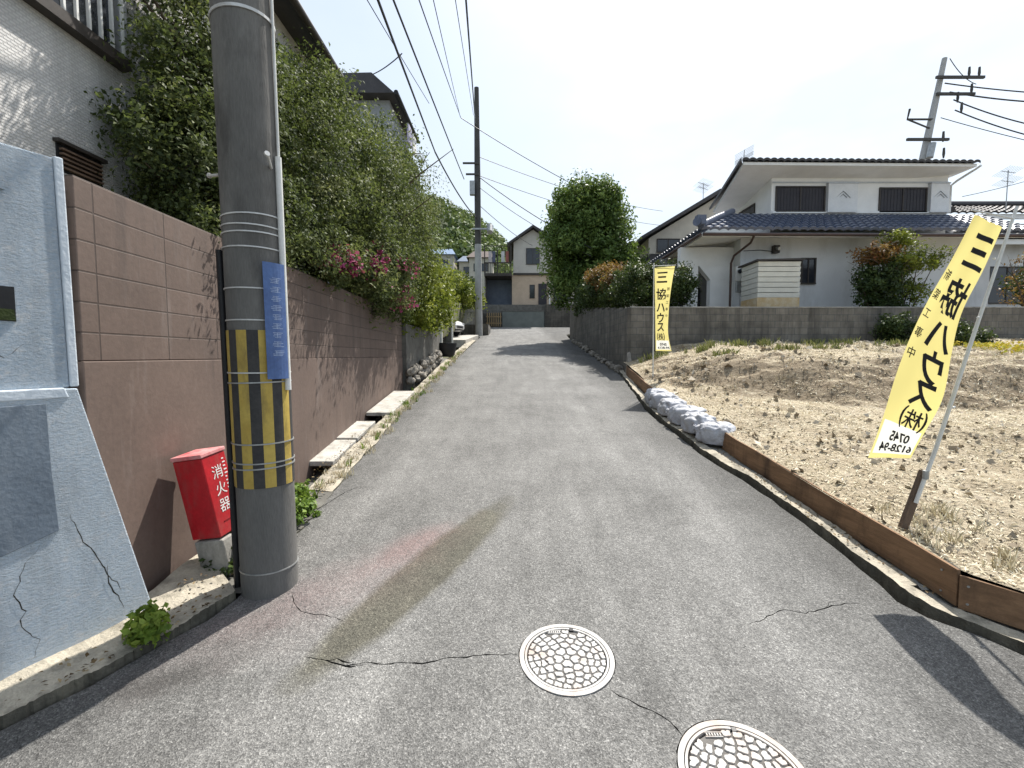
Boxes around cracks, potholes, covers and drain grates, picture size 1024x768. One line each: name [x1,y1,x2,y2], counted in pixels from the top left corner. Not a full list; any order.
crack [611,690,682,738]
manhole cover [519,624,615,698]
crack [308,654,516,668]
crack [752,601,857,623]
manhole cover [677,720,804,768]
